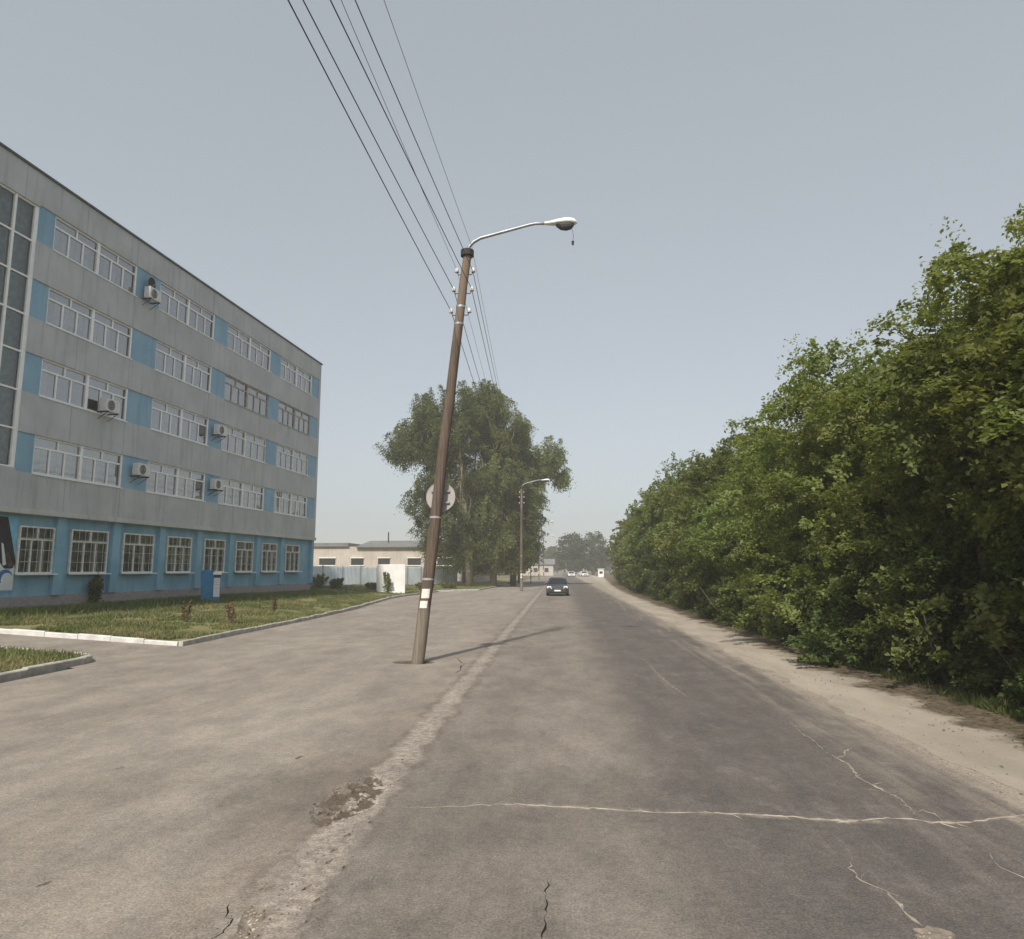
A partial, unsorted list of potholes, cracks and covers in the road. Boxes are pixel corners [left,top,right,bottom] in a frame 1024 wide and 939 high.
crack [405,722,1024,828]
pothole [306,774,388,828]
crack [847,863,921,925]
crack [541,879,550,938]
